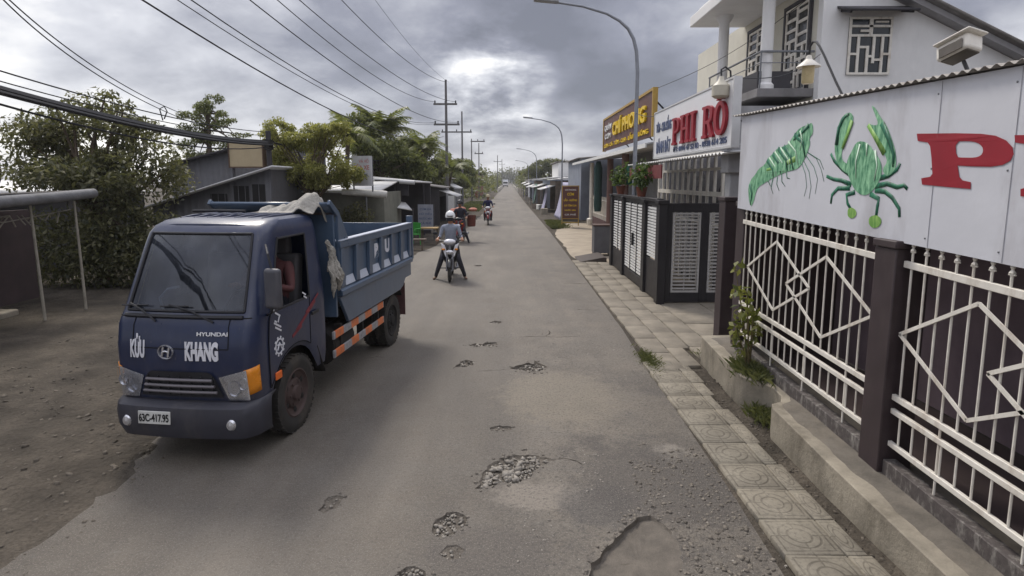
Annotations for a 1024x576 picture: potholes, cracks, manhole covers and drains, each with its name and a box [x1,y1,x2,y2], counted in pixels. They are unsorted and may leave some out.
pothole [589,515,684,576]
pothole [319,495,344,513]
pothole [475,454,556,489]
pothole [439,545,465,559]
pothole [432,512,467,539]
pothole [510,361,547,372]
pothole [395,566,426,576]
